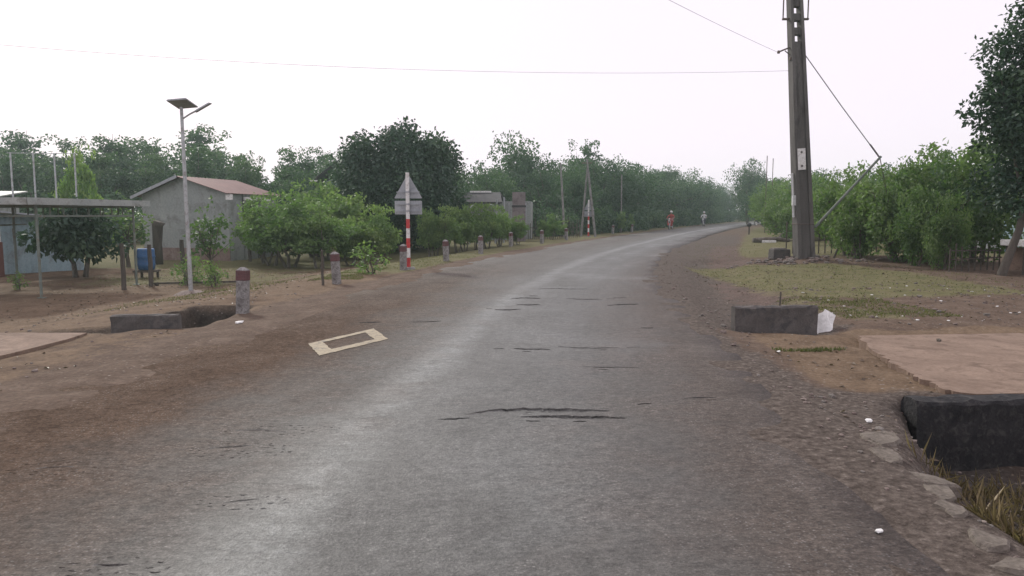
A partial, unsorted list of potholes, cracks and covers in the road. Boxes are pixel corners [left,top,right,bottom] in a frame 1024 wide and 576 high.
crack [486,288,636,311]
